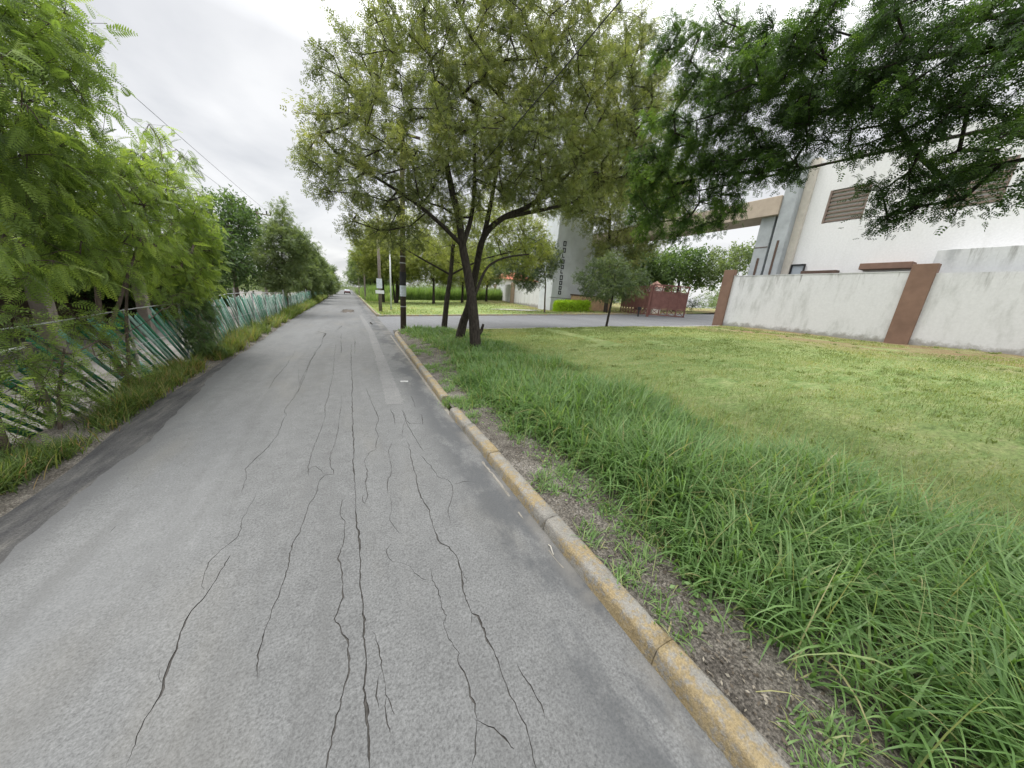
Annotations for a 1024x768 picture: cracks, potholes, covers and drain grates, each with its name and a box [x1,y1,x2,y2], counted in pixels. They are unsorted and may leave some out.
crack [126,503,252,765]
crack [241,326,545,768]
